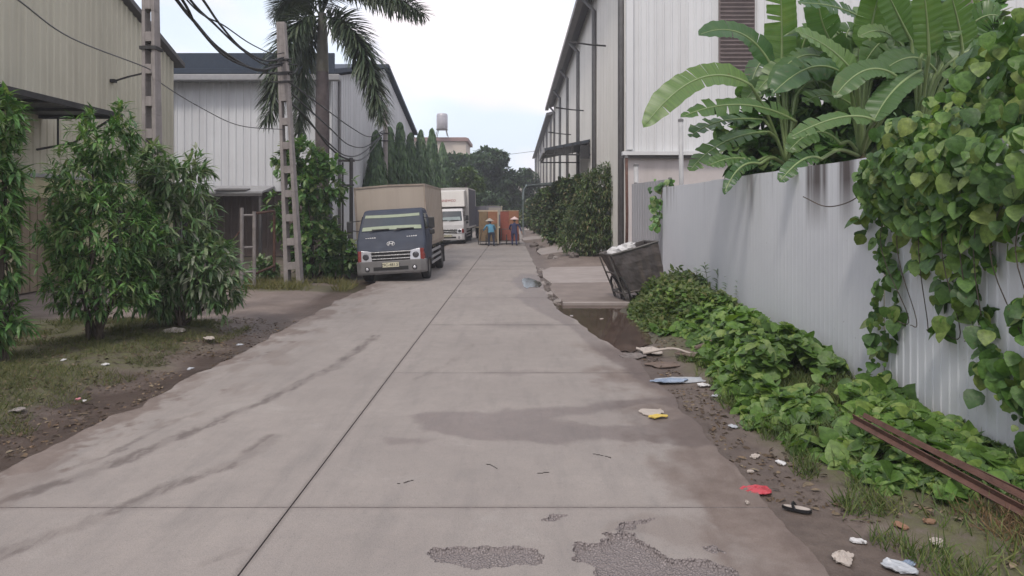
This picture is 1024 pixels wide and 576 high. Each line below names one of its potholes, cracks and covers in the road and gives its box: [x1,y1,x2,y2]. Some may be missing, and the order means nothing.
pothole [541,513,568,522]
pothole [615,517,656,533]
pothole [572,531,740,576]
pothole [425,545,545,570]
